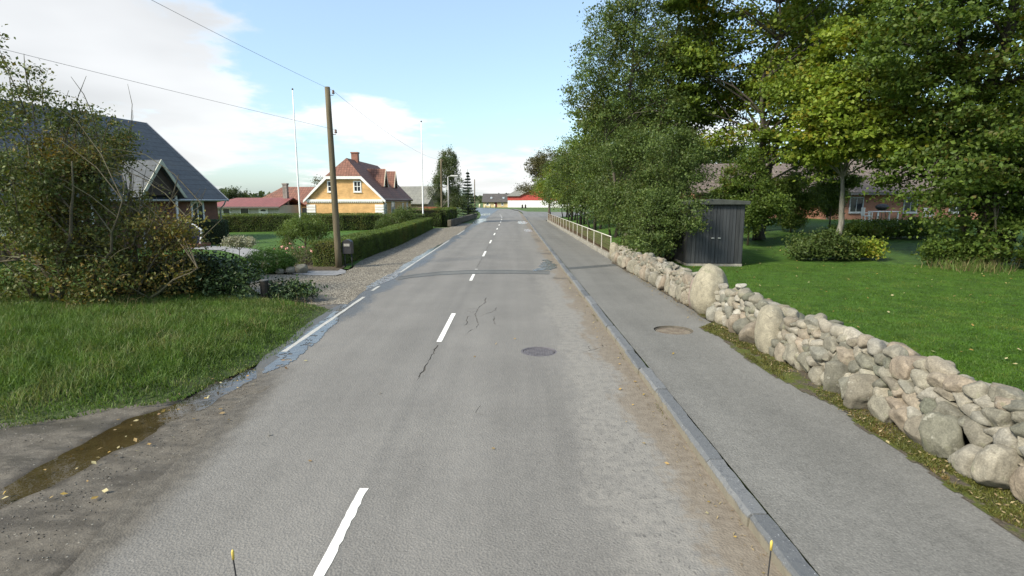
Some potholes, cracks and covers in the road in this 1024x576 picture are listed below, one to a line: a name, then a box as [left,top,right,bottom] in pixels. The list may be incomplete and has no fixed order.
manhole cover [521,347,557,356]
manhole cover [654,326,693,335]
